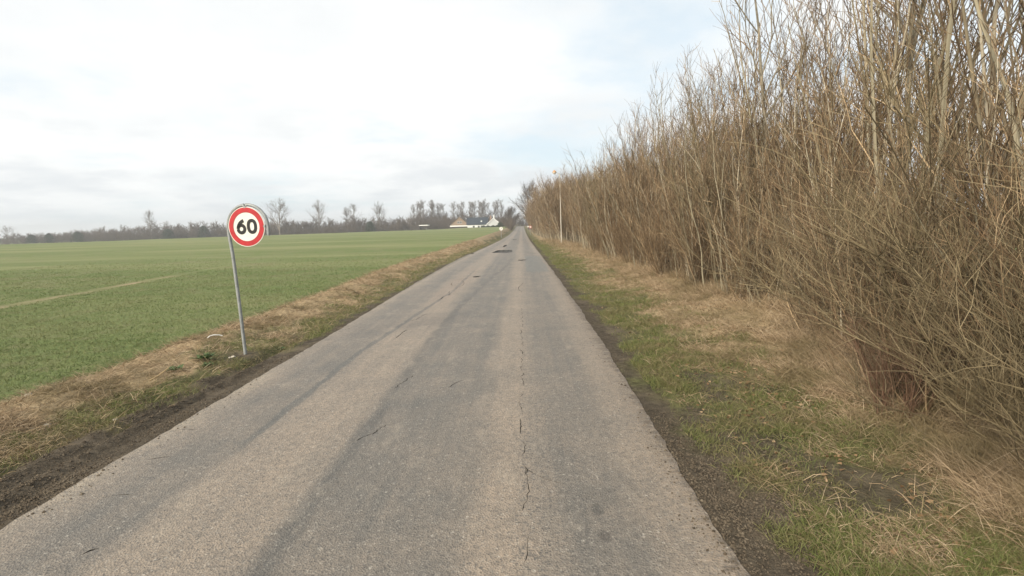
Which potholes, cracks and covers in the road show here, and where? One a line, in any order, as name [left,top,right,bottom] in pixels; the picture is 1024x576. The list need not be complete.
crack [520,308,559,562]
